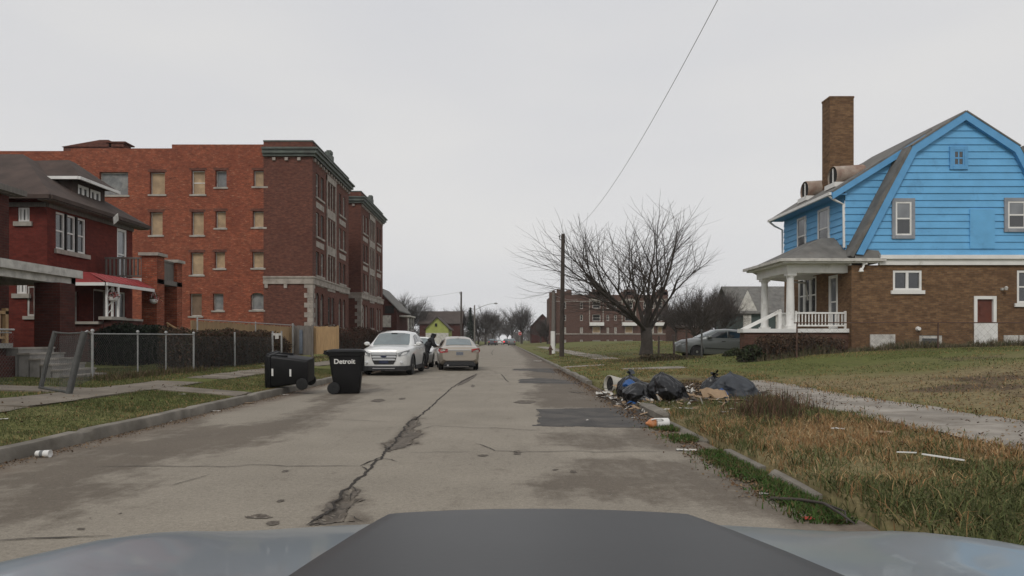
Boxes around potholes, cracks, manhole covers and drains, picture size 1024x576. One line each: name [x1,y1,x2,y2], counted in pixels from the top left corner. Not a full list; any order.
crack [102,354,663,525]
